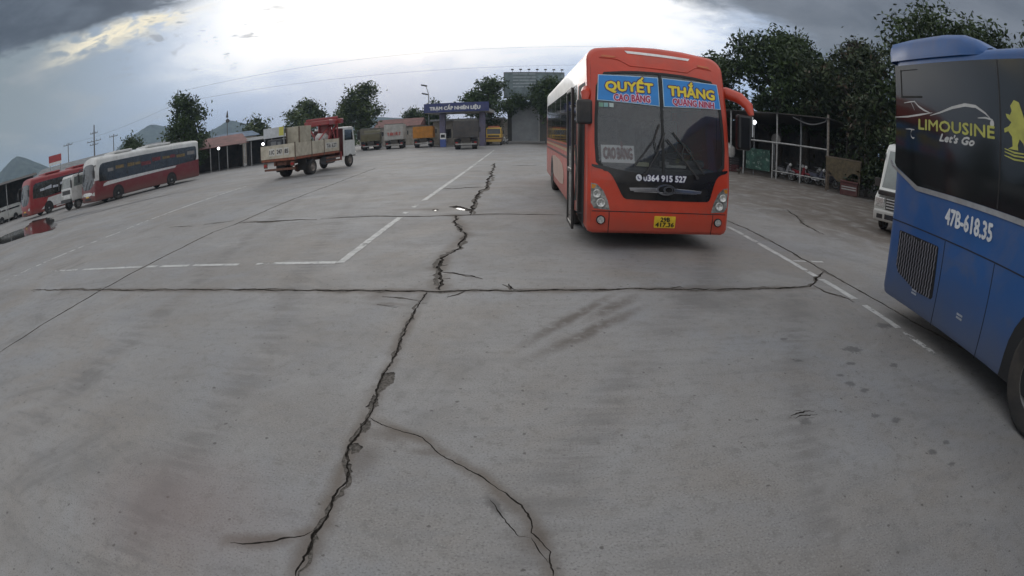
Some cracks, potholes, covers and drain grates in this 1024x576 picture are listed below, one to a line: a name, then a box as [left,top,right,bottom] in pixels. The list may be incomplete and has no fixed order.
crack [788,210,823,234]
crack [231,163,554,576]
